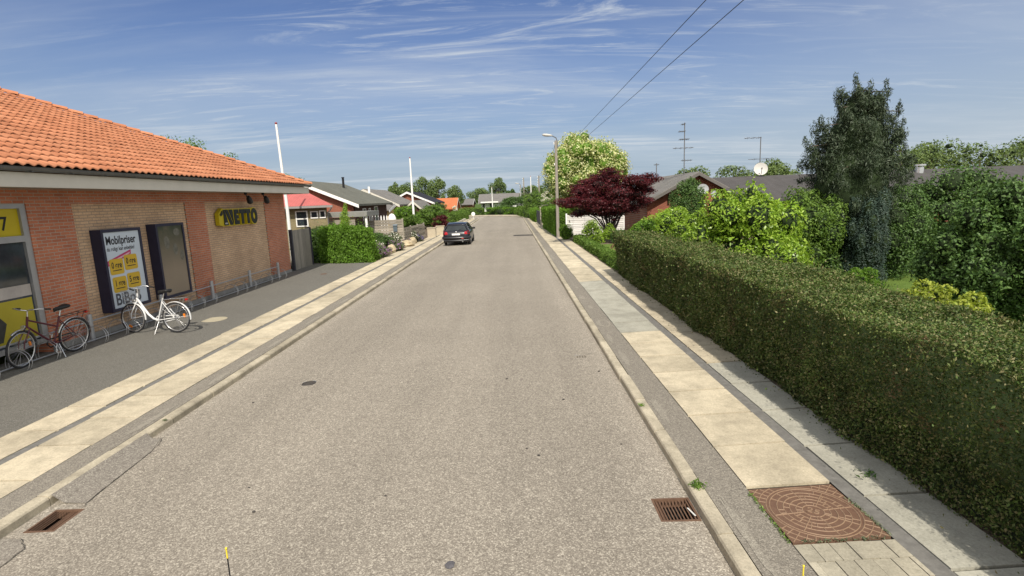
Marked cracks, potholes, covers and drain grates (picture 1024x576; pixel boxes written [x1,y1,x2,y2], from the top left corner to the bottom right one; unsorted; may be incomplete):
drain grate [651,497,702,522]
drain grate [23,509,84,533]
manhole cover [748,484,891,546]
